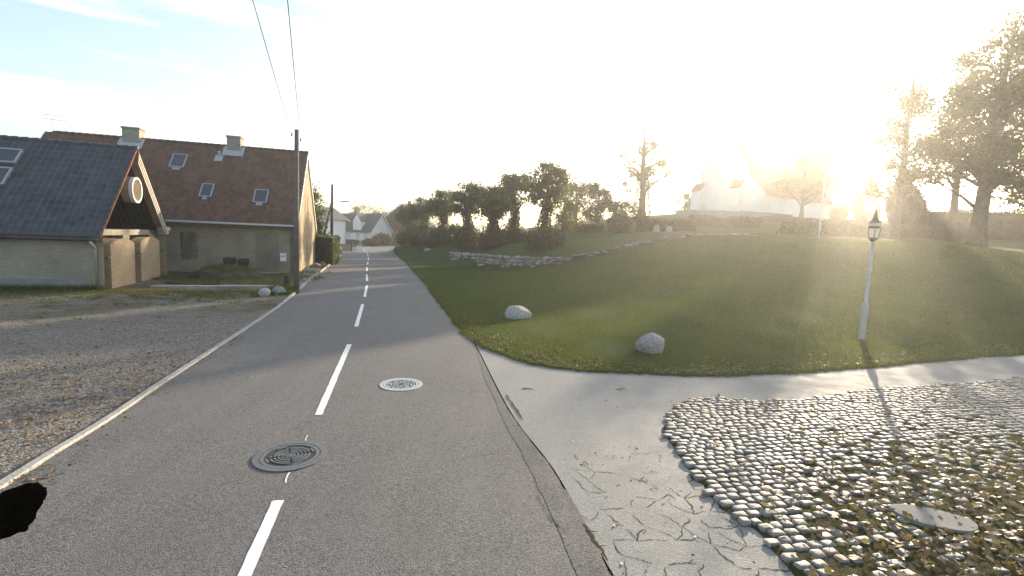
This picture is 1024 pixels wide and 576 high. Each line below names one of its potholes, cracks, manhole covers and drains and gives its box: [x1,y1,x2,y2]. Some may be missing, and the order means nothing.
manhole cover [889,504,978,534]
manhole cover [252,441,327,472]
crack [570,453,790,576]
manhole cover [379,378,423,391]
